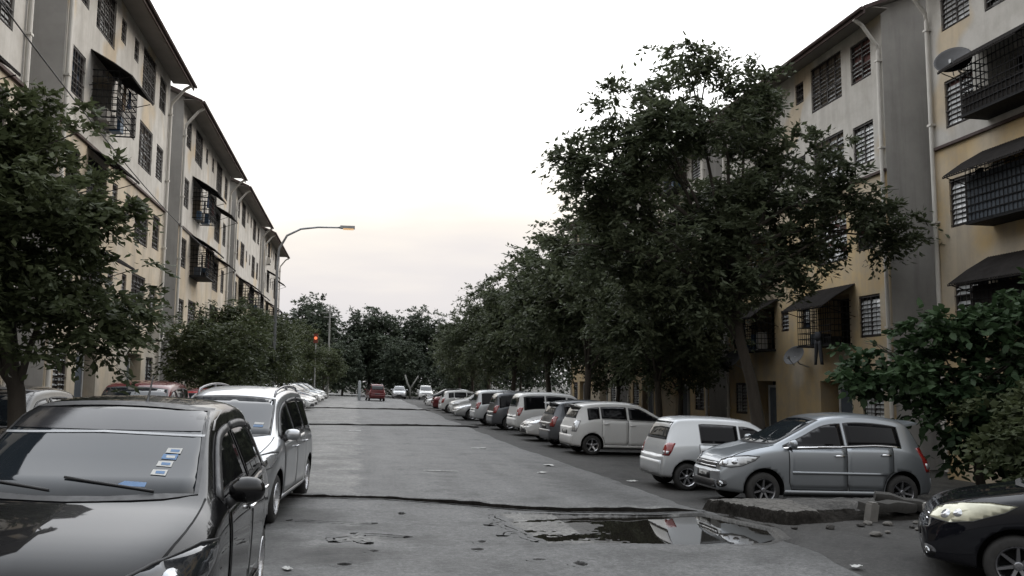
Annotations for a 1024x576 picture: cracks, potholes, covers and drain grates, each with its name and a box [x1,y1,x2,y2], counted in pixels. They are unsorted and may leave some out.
pothole [493,512,791,546]
